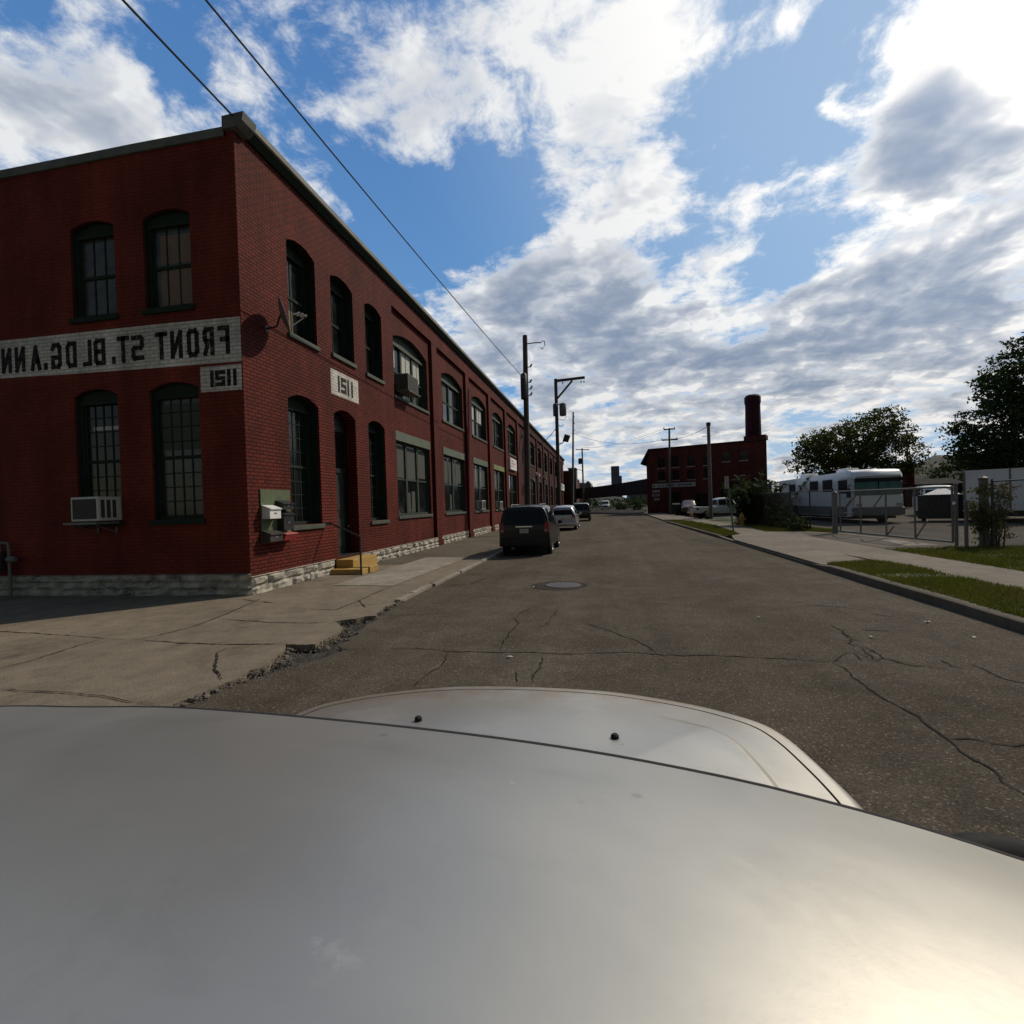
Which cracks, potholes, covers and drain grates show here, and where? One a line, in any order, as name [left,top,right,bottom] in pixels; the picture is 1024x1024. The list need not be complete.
manhole cover [531,581,588,590]
crack [213,645,251,680]
crack [337,605,1024,794]
pothole [249,618,377,680]
